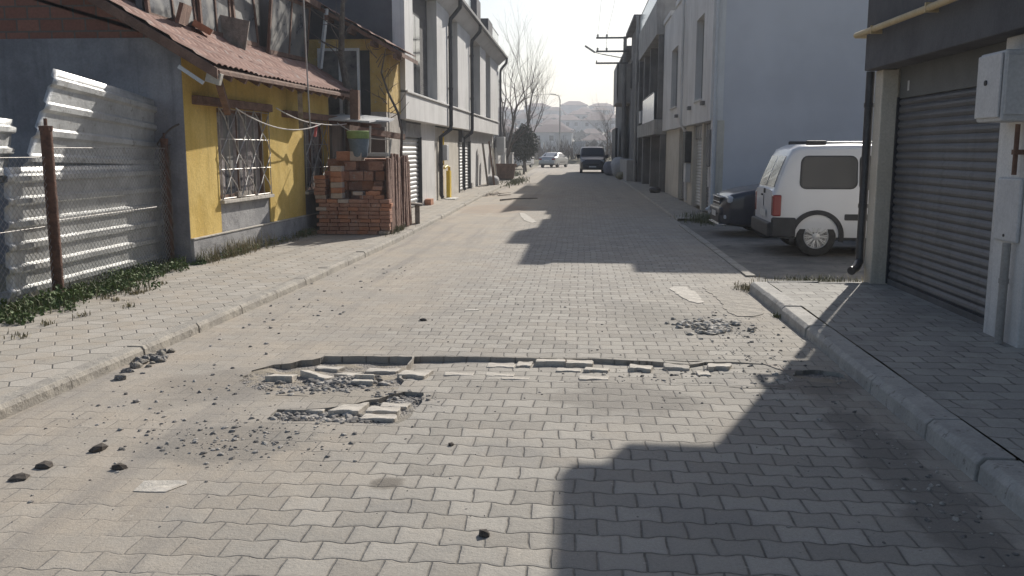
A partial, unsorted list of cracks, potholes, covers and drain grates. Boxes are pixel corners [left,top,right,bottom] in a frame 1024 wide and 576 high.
pothole [239,356,412,391]
pothole [270,392,424,425]
